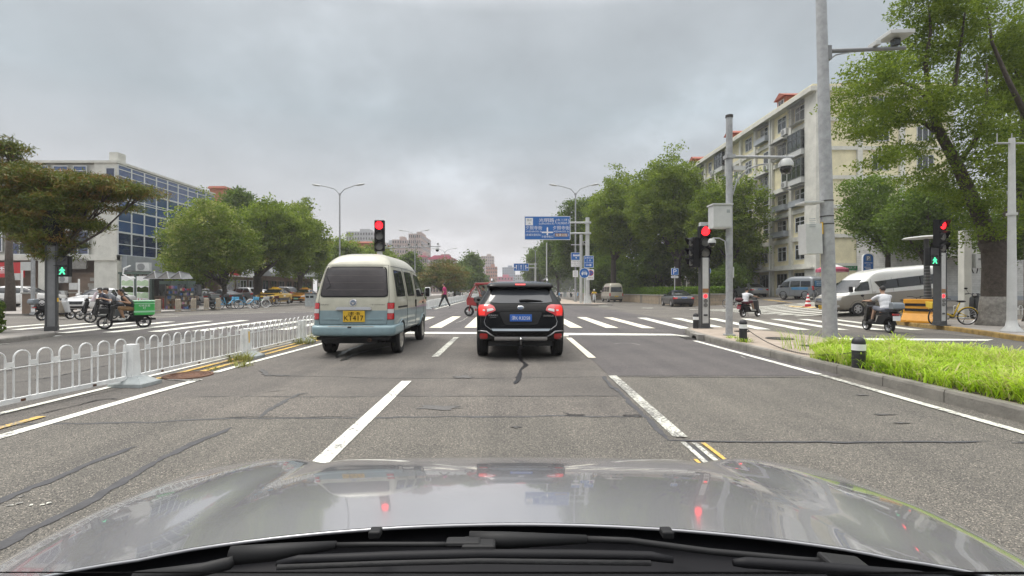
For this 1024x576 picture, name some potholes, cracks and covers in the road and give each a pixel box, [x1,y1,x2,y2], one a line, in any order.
manhole cover [161,371,214,380]
